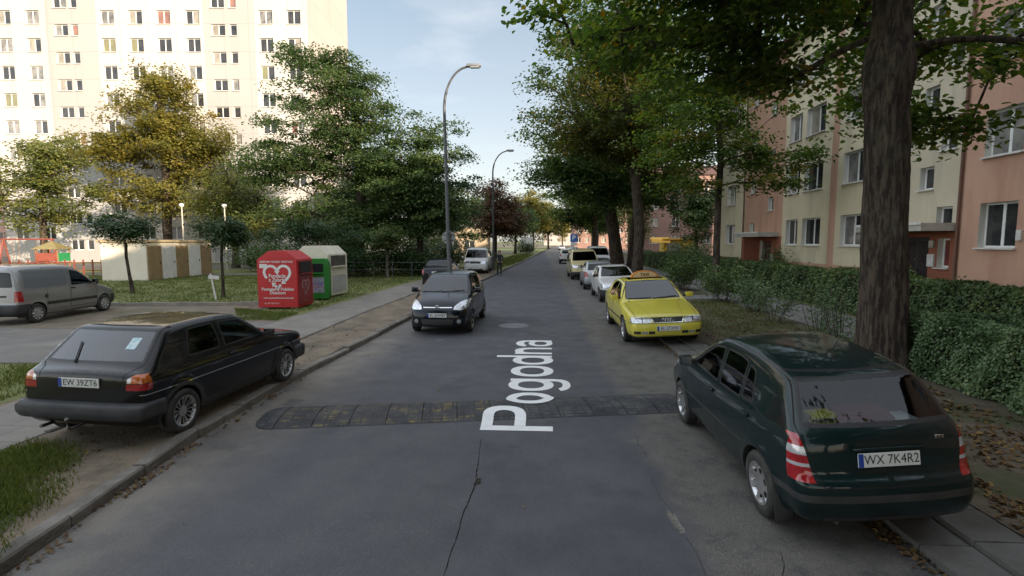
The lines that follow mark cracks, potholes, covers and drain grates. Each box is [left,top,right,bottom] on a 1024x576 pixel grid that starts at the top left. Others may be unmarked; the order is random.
crack [443,439,482,576]
